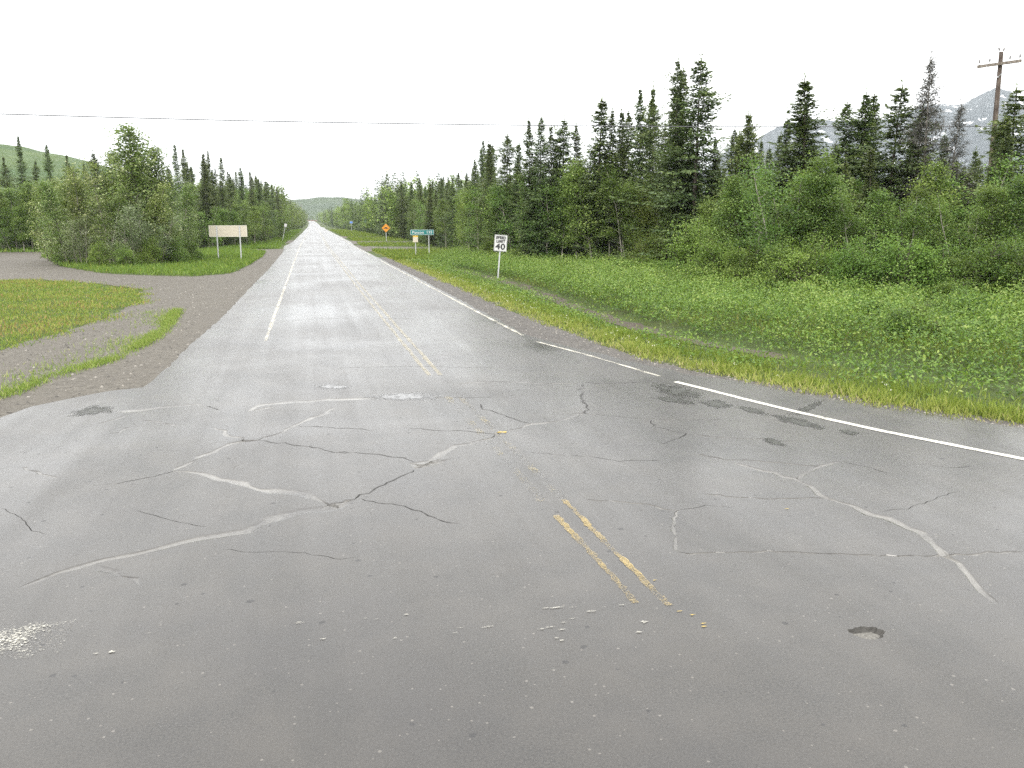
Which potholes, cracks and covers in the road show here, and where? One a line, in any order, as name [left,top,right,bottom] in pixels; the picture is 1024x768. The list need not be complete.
pothole [848,626,885,640]
crack [2,366,733,590]
crack [532,420,1023,606]
